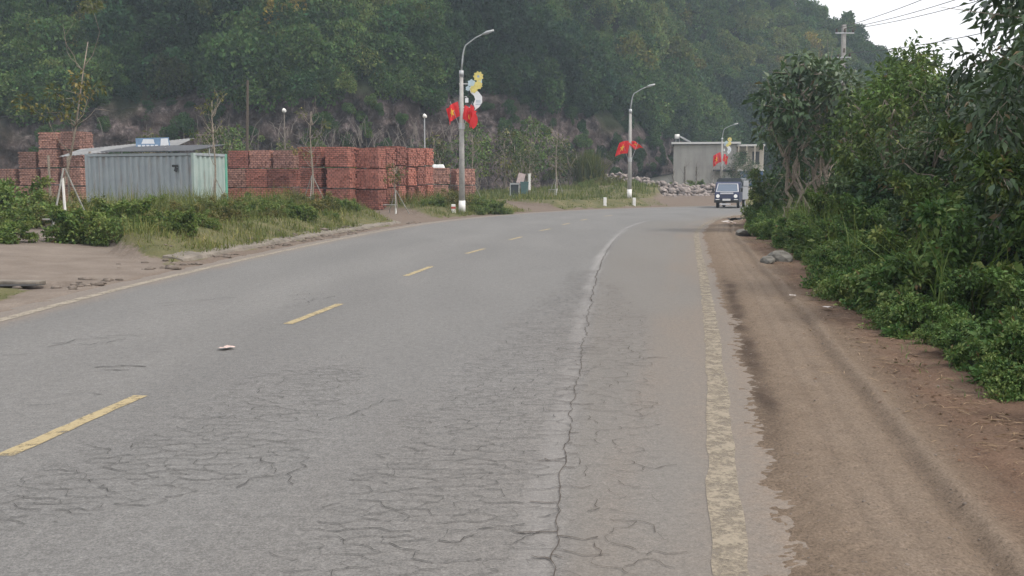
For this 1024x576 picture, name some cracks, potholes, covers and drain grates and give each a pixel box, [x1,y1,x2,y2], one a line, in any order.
crack [0,363,393,529]
crack [256,270,597,576]
crack [556,283,687,576]
